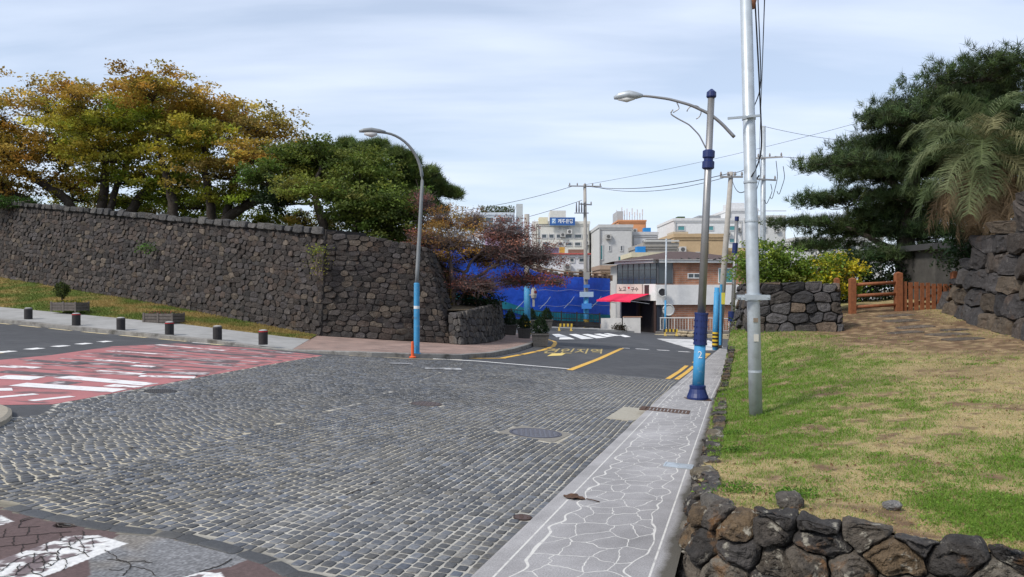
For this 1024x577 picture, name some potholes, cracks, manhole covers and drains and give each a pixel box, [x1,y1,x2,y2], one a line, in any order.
crack [0,517,156,577]
drain grate [639,406,690,414]
manhole cover [499,426,571,442]
